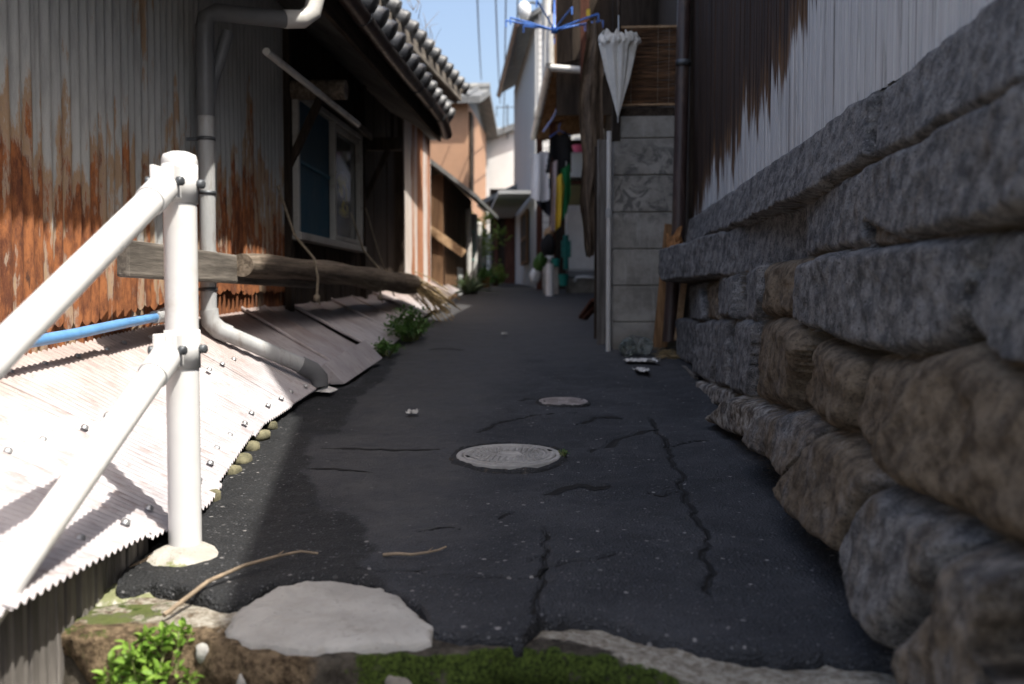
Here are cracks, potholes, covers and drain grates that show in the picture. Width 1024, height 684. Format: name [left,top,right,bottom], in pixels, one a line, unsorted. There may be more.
manhole cover [535,397,591,408]
crack [407,531,616,628]
manhole cover [449,441,567,474]
crack [476,398,718,598]
